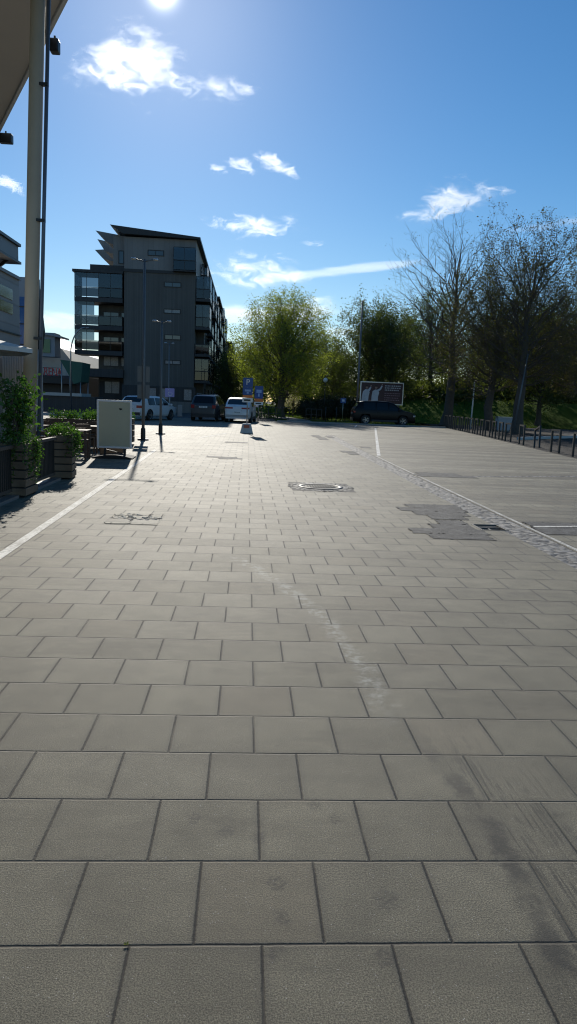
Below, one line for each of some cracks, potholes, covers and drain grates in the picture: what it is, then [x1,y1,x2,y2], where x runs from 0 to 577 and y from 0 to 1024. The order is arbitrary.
manhole cover [288,482,355,492]
